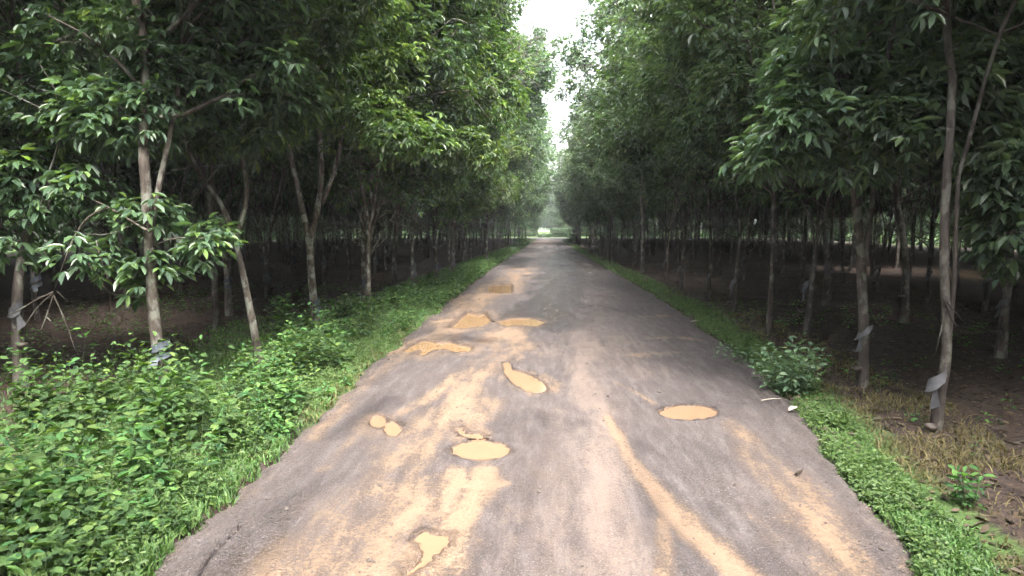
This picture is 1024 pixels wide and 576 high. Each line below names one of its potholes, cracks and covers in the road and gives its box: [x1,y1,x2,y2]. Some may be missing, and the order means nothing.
pothole [436,438,525,467]
pothole [438,310,499,330]
pothole [647,401,732,424]
pothole [394,338,482,358]
pothole [439,422,500,441]
pothole [493,360,559,397]
pothole [379,519,474,576]
pothole [493,316,554,328]
pothole [355,411,417,442]
